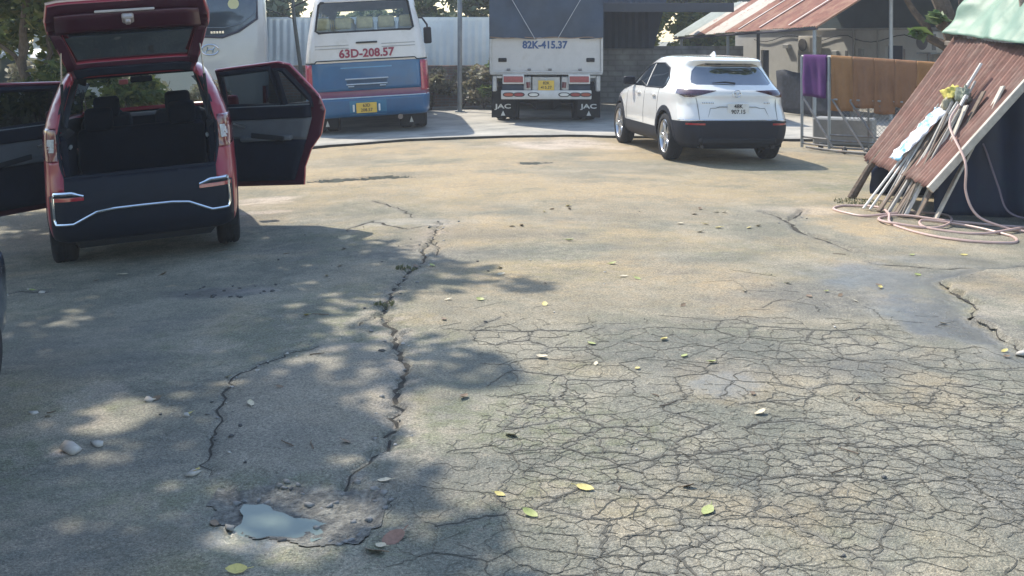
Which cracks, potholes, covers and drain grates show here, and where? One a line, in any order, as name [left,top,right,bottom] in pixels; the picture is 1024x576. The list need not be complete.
crack [344,201,443,492]
crack [199,347,316,477]
pothole [206,485,388,547]
crack [772,212,849,251]
crack [360,270,1024,576]
